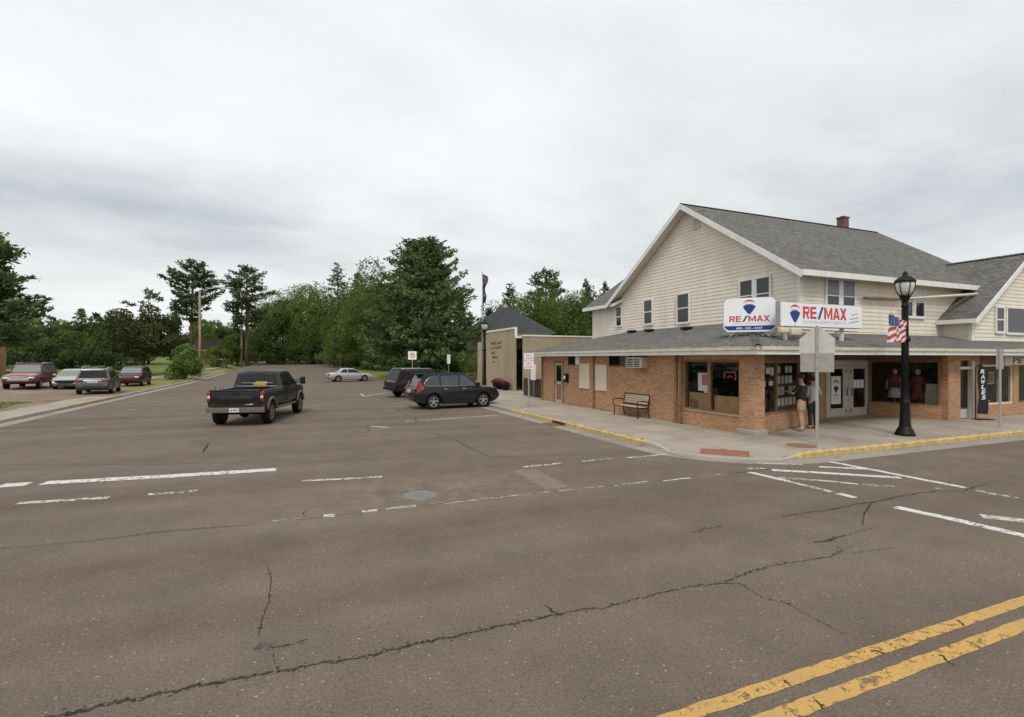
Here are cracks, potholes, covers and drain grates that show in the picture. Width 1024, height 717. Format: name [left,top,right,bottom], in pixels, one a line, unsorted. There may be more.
crack [47,484,988,717]
crack [346,408,490,457]
manhole cover [401,490,437,499]
